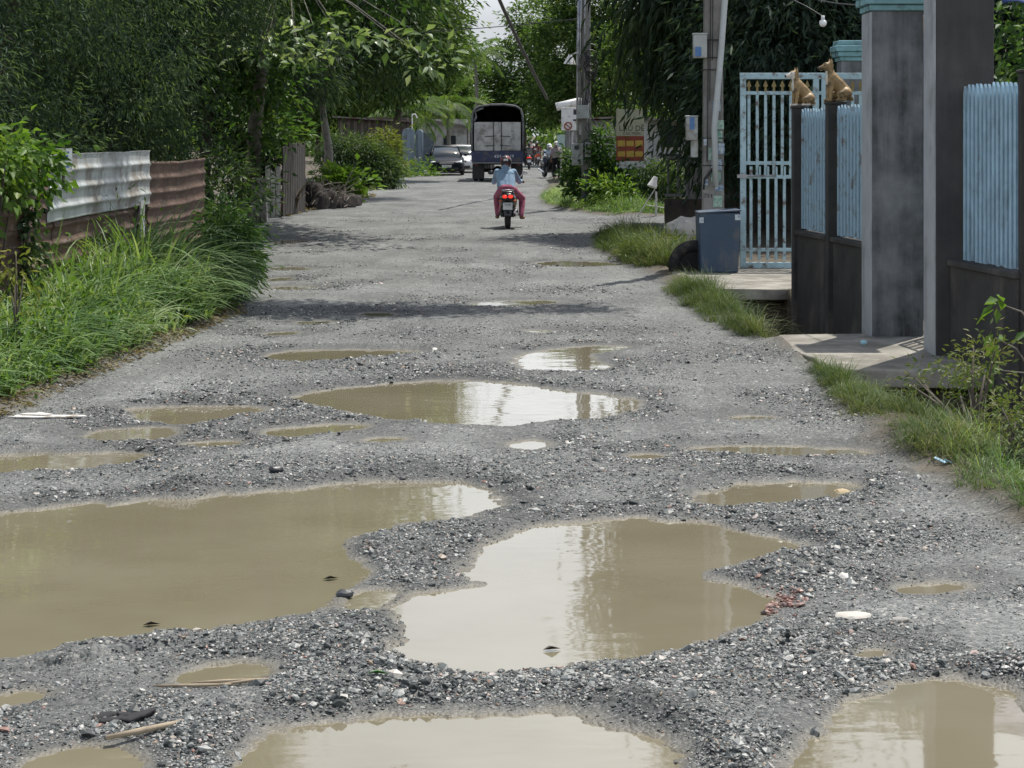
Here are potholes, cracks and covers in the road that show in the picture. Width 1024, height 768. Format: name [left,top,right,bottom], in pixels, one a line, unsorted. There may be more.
pothole [769,671,1024,768]
pothole [887,579,983,595]
pothole [0,739,162,768]
pothole [77,424,186,441]
pothole [683,477,865,506]
pothole [254,422,375,437]
pothole [121,403,273,425]
pothole [288,378,646,427]
pothole [679,443,879,456]
pothole [379,513,817,675]
pothole [509,344,633,371]
pothole [260,348,426,361]
